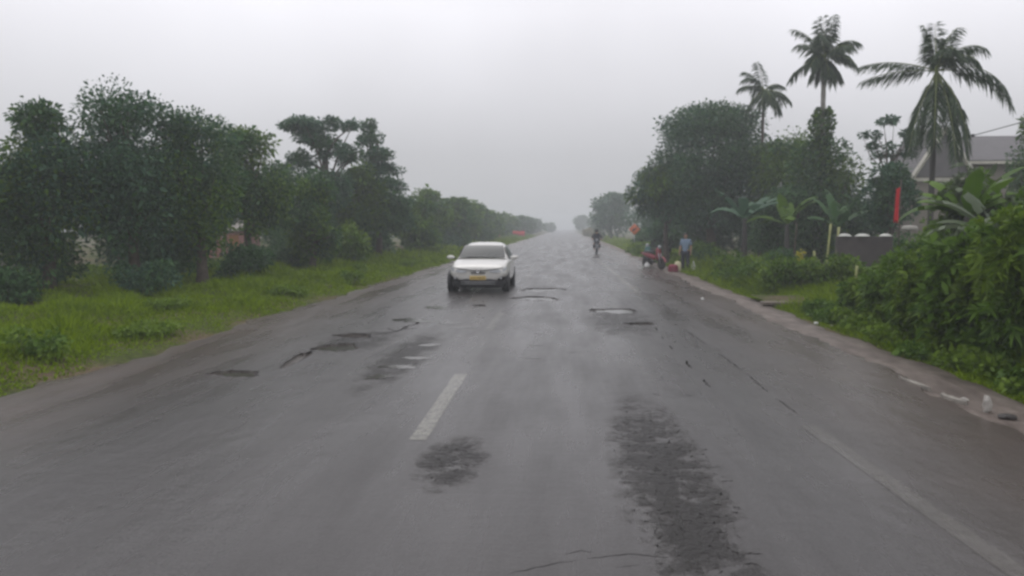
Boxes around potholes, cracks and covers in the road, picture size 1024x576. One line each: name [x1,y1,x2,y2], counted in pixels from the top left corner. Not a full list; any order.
pothole [206,370,260,378]
pothole [309,343,360,352]
crack [513,404,761,573]
crack [691,333,796,413]
